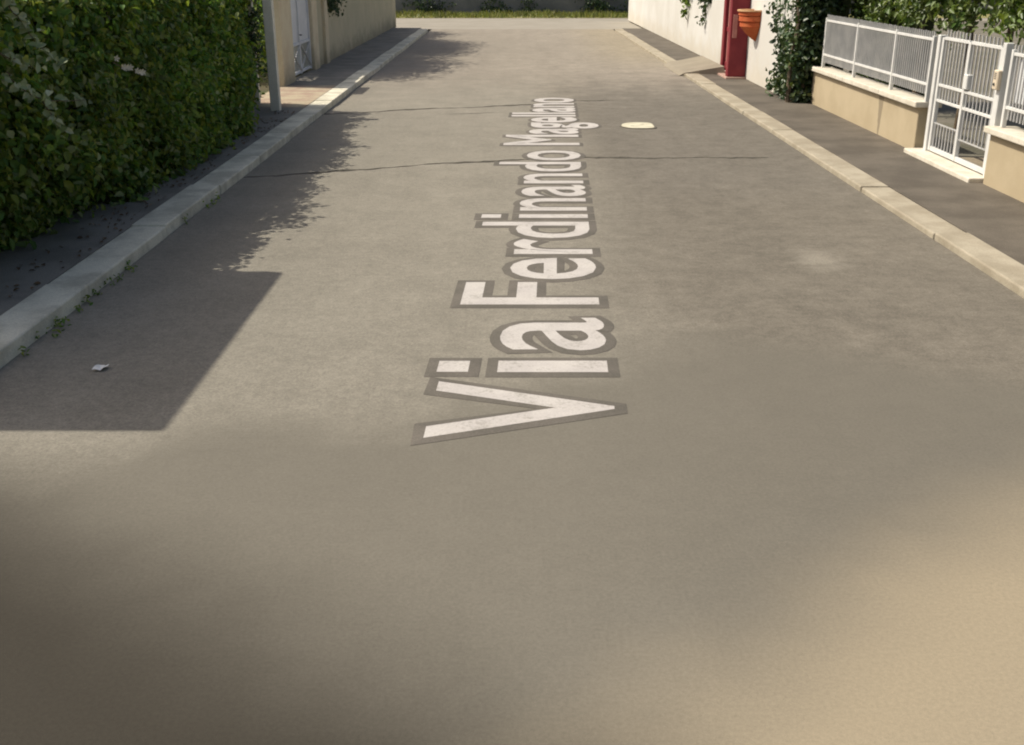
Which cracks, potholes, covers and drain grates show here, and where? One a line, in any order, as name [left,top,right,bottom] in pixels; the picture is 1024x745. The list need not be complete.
crack [323,100,615,115]
crack [243,156,769,178]
